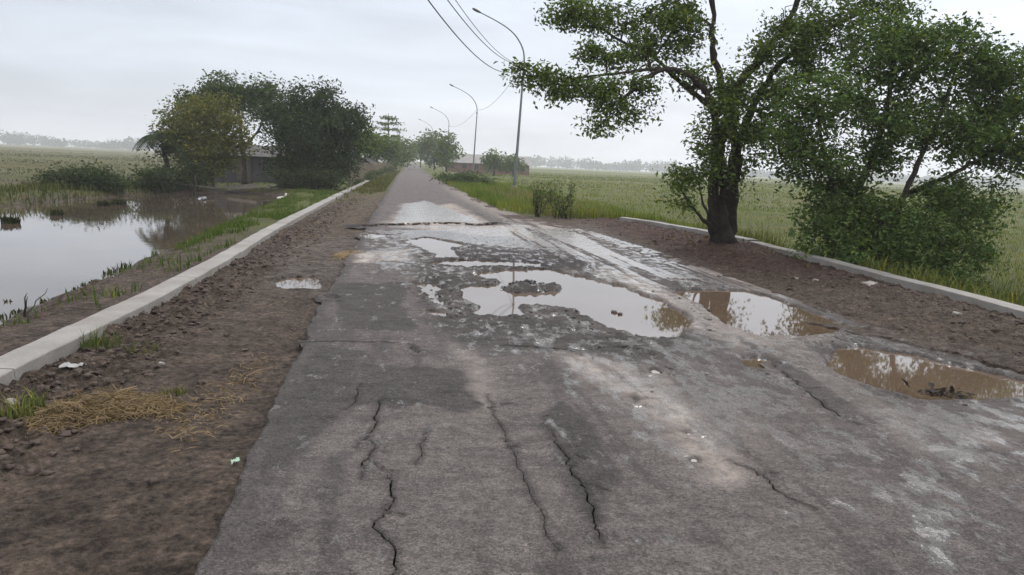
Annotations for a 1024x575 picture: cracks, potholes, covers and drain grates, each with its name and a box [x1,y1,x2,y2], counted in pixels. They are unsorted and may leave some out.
pothole [406,276,463,308]
pothole [425,257,548,269]
pothole [809,342,1024,404]
crack [468,393,616,553]
pothole [435,265,704,340]
pothole [416,307,459,319]
crack [344,221,510,229]
pothole [664,286,854,338]
crack [336,382,437,575]
crack [719,458,822,513]
crack [759,363,866,425]
pothole [397,236,473,260]
